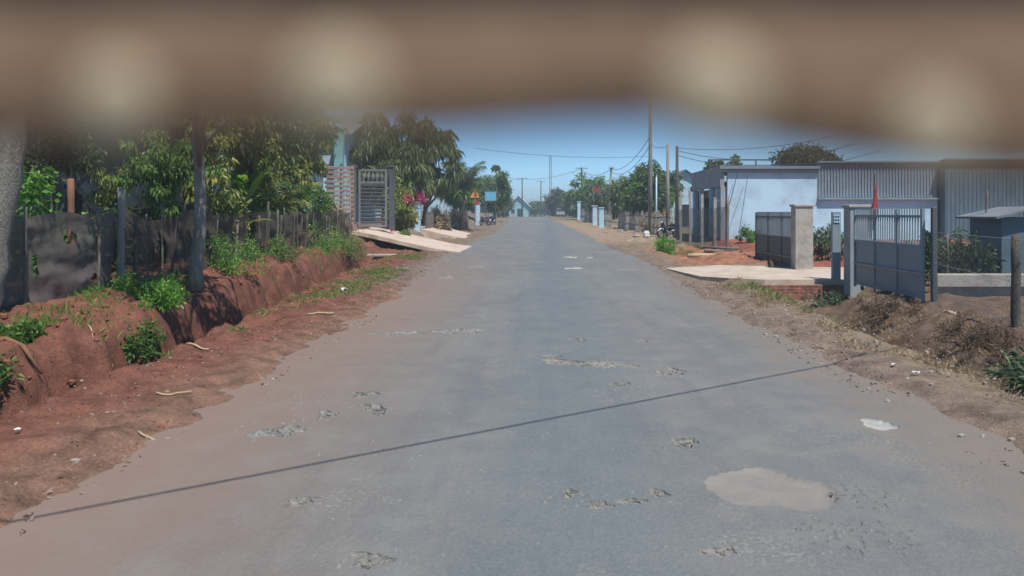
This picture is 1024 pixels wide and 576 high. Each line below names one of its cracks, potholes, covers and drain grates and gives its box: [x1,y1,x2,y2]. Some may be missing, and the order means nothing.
pothole [543,358,640,369]
pothole [669,438,699,450]
pothole [357,403,387,416]
pothole [586,500,616,509]
pothole [350,551,397,569]
pothole [317,410,340,420]
pothole [244,424,306,438]
pothole [699,545,737,557]
pothole [649,487,671,497]
crack [789,485,923,554]
pothole [285,496,322,508]
pothole [654,367,686,376]
